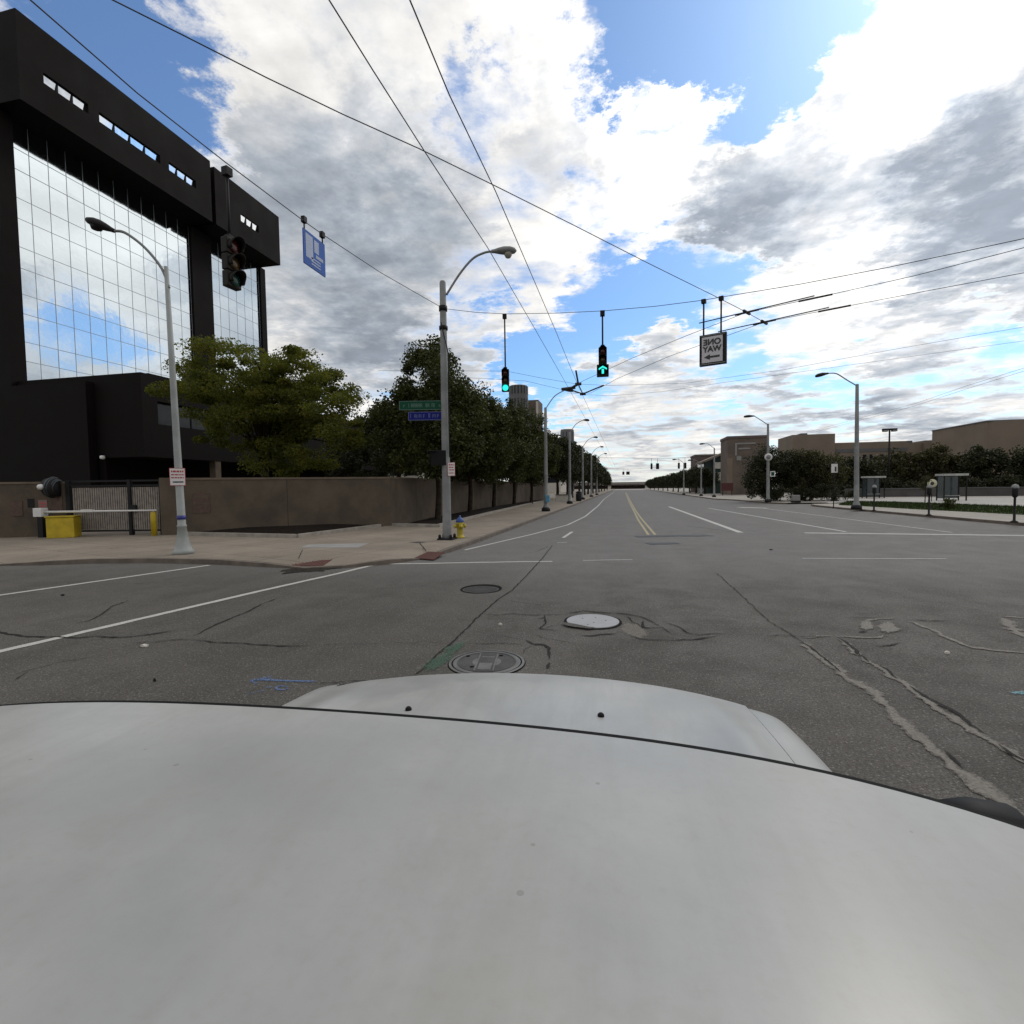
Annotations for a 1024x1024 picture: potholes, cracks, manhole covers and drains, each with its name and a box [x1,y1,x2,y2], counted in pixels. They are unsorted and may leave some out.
manhole cover [460,584,502,593]
crack [195,598,308,646]
crack [772,617,1024,760]
manhole cover [448,650,526,674]
crack [0,581,196,643]
crack [478,600,722,668]
manhole cover [564,614,622,629]
